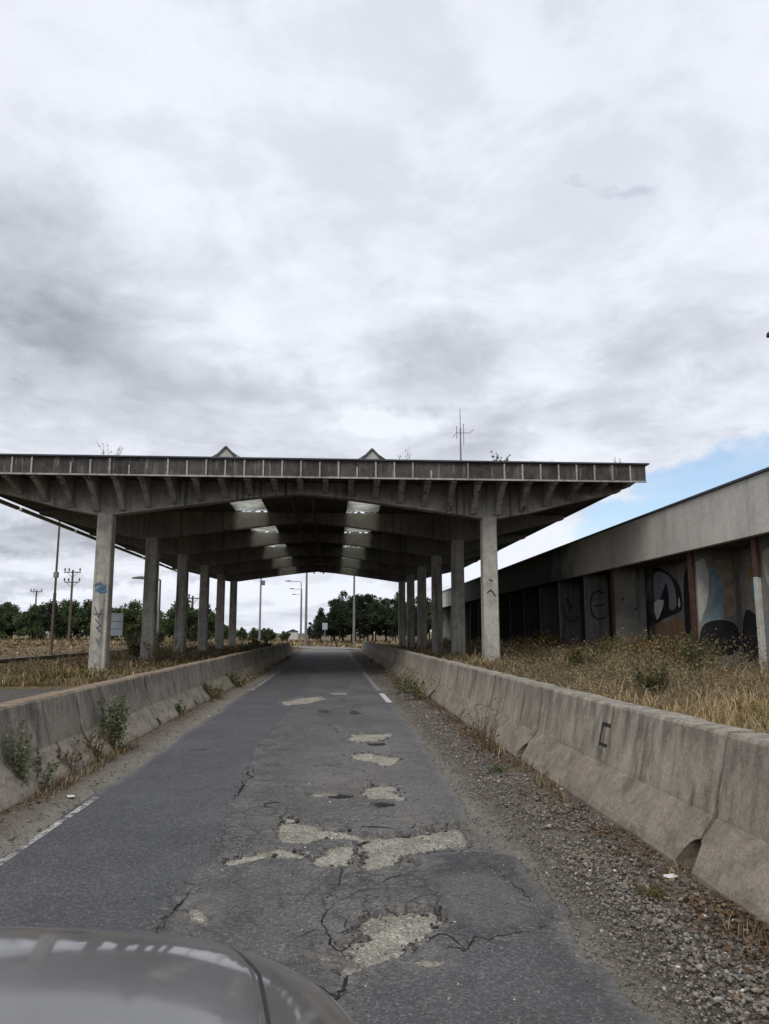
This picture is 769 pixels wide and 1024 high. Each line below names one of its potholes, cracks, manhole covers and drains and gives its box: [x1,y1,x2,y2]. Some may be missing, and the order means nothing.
pothole [362,786,405,801]
pothole [347,753,400,767]
pothole [277,819,370,844]
pothole [358,826,471,870]
pothole [313,846,367,867]
pothole [226,849,303,866]
pothole [282,696,325,705]
pothole [348,733,392,742]
crack [234,766,293,808]
crack [425,864,548,952]
pothole [341,912,446,967]
